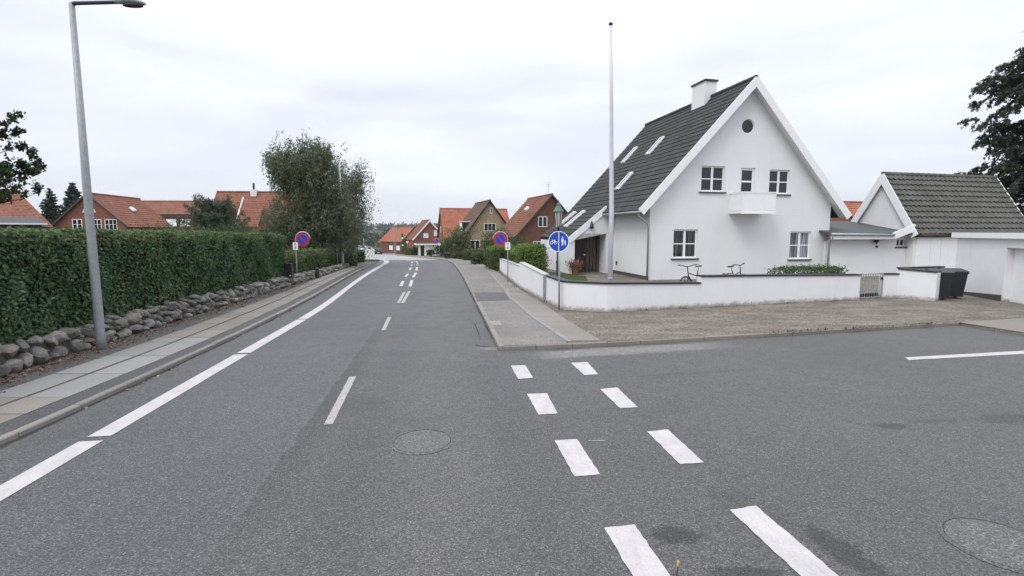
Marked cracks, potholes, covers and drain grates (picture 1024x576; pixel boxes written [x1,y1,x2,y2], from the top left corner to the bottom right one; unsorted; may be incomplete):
manhole cover [936,516,1024,574]
manhole cover [390,429,454,455]
